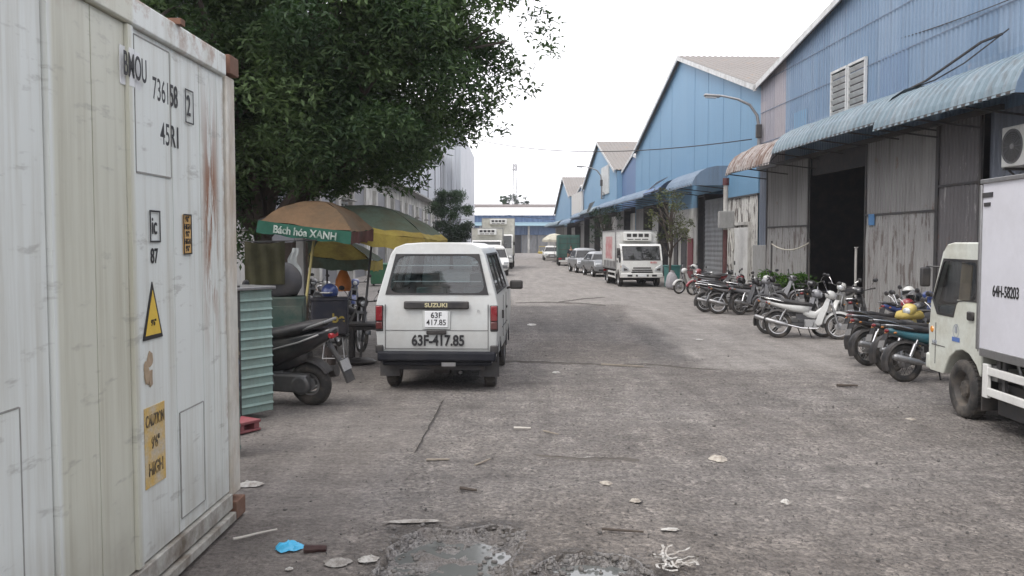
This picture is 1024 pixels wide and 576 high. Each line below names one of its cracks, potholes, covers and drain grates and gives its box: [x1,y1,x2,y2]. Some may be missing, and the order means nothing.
crack [415,400,444,453]
pothole [515,548,663,576]
pothole [362,522,528,576]
crack [518,297,606,306]
